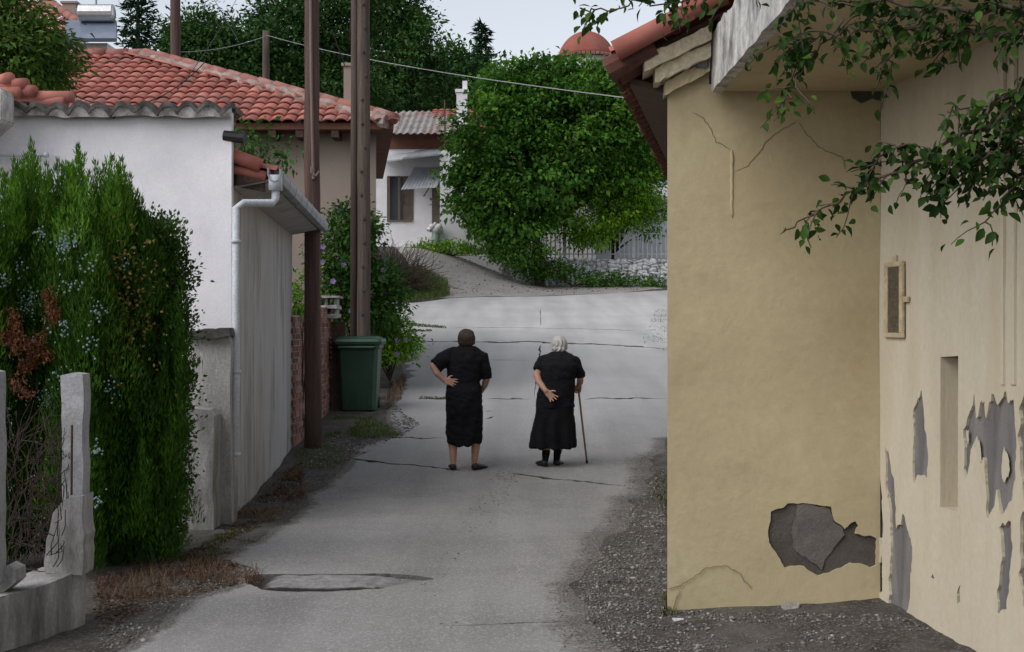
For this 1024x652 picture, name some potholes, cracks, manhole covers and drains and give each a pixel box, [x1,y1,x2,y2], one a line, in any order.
crack [427,317,660,399]
